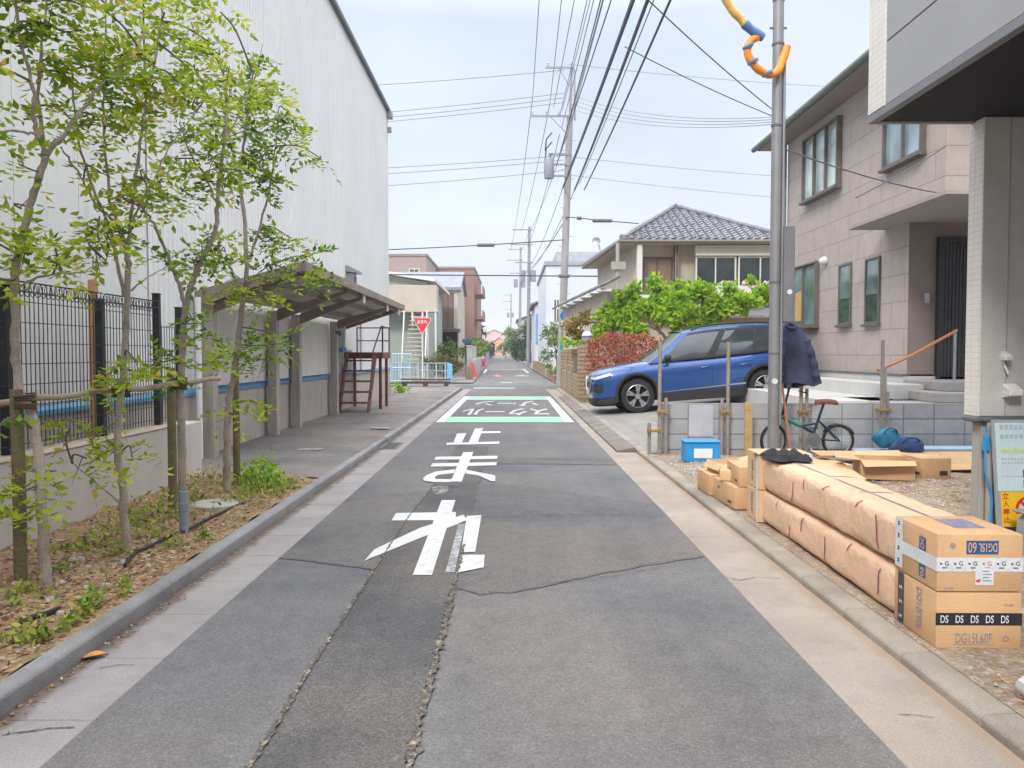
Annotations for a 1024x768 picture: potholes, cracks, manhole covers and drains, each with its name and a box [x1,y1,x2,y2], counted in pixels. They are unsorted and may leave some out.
crack [2,727,72,735]
crack [456,556,699,593]
manhole cover [190,499,239,511]
